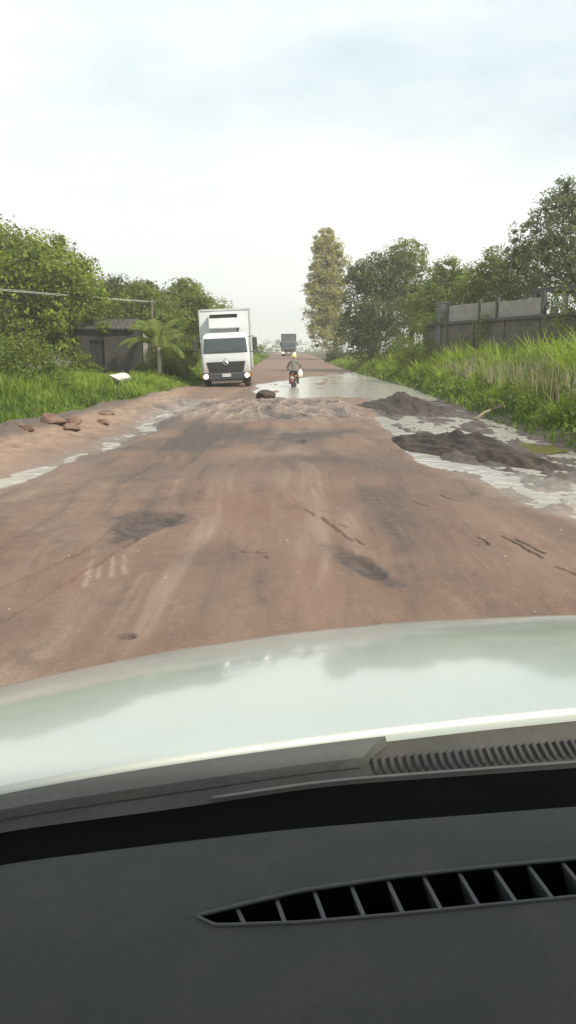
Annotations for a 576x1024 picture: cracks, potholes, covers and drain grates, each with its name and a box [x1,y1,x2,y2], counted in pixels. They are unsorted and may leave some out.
crack [477,536,576,575]
pothole [109,510,188,540]
crack [303,508,366,545]
pothole [250,372,385,399]
pothole [322,545,398,588]
